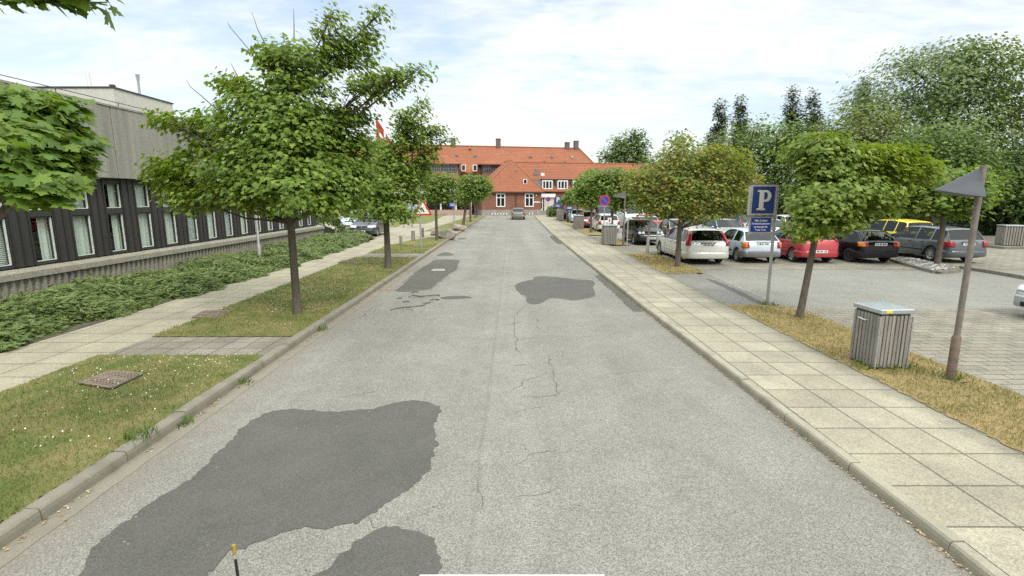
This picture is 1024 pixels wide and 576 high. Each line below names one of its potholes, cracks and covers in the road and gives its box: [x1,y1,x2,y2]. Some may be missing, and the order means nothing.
crack [506,292,563,412]
manhole cover [78,370,142,389]
manhole cover [192,310,232,318]
